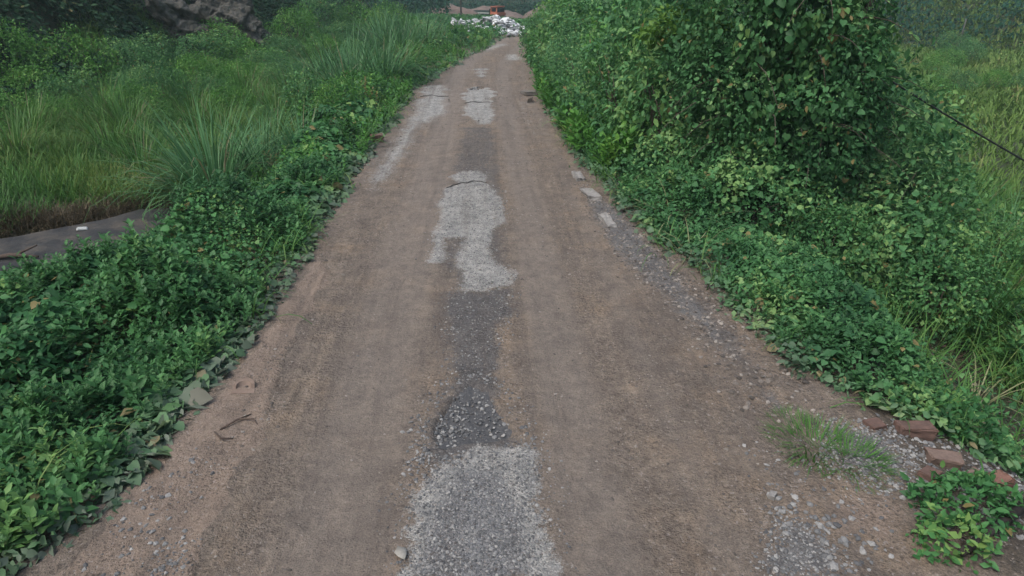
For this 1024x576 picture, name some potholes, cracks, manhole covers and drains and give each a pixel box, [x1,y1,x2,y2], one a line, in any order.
pothole [437,386,512,449]
